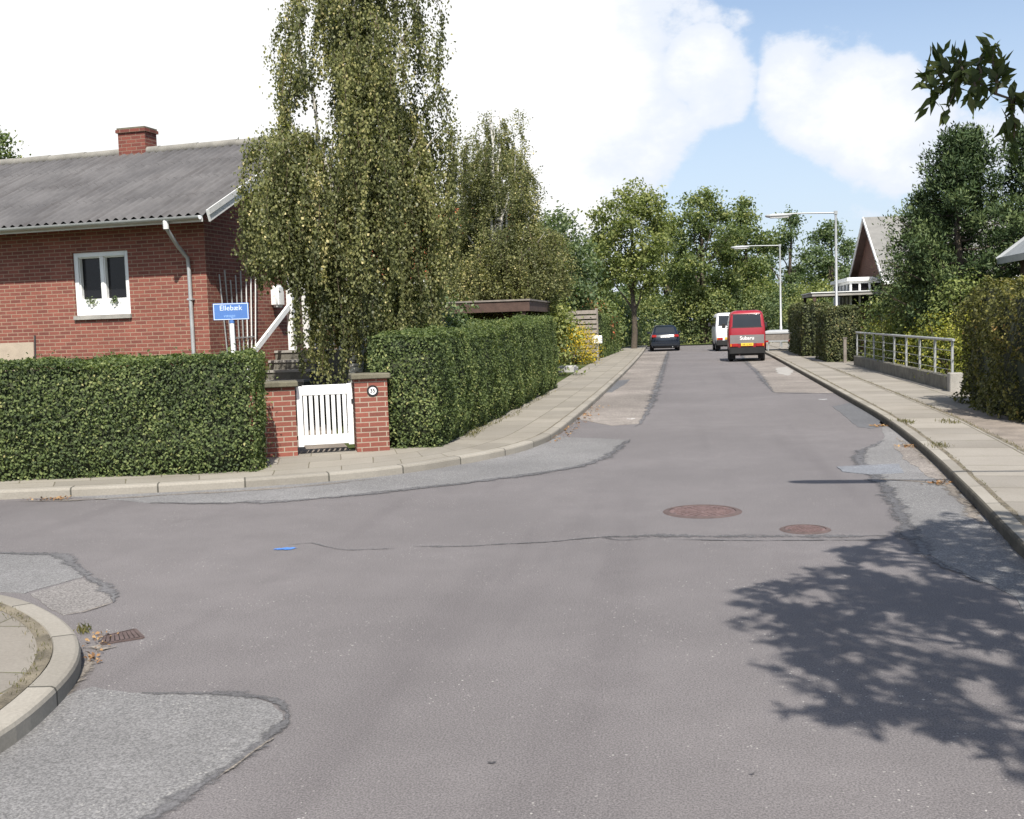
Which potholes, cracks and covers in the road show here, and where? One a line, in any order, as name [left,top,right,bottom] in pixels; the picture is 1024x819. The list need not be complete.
manhole cover [779,524,831,534]
drain grate [101,629,145,645]
manhole cover [663,504,742,519]
